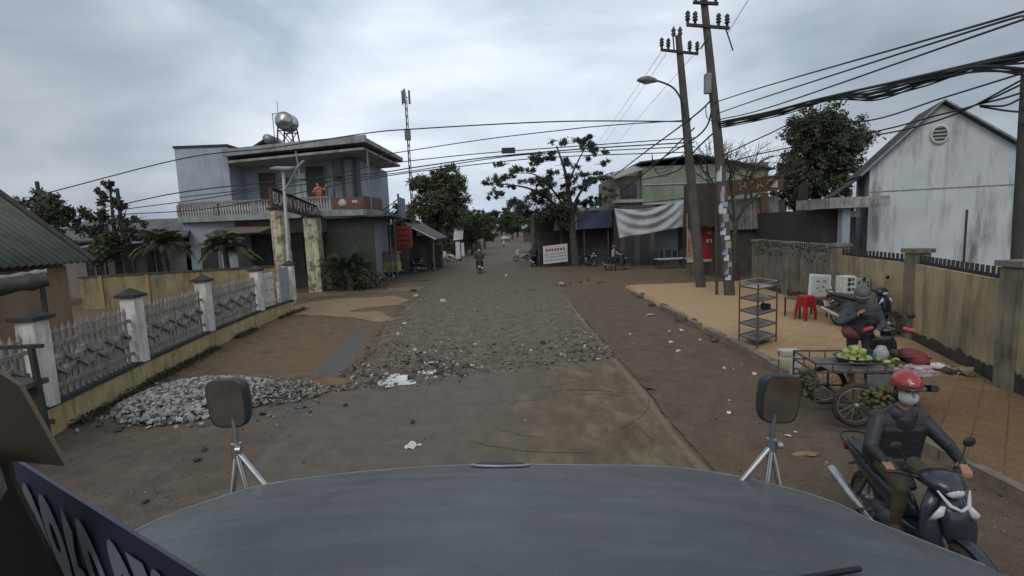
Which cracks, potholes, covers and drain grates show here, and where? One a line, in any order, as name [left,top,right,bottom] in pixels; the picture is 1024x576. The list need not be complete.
pothole [301,374,385,388]
crack [496,308,716,472]
crack [473,429,581,453]
